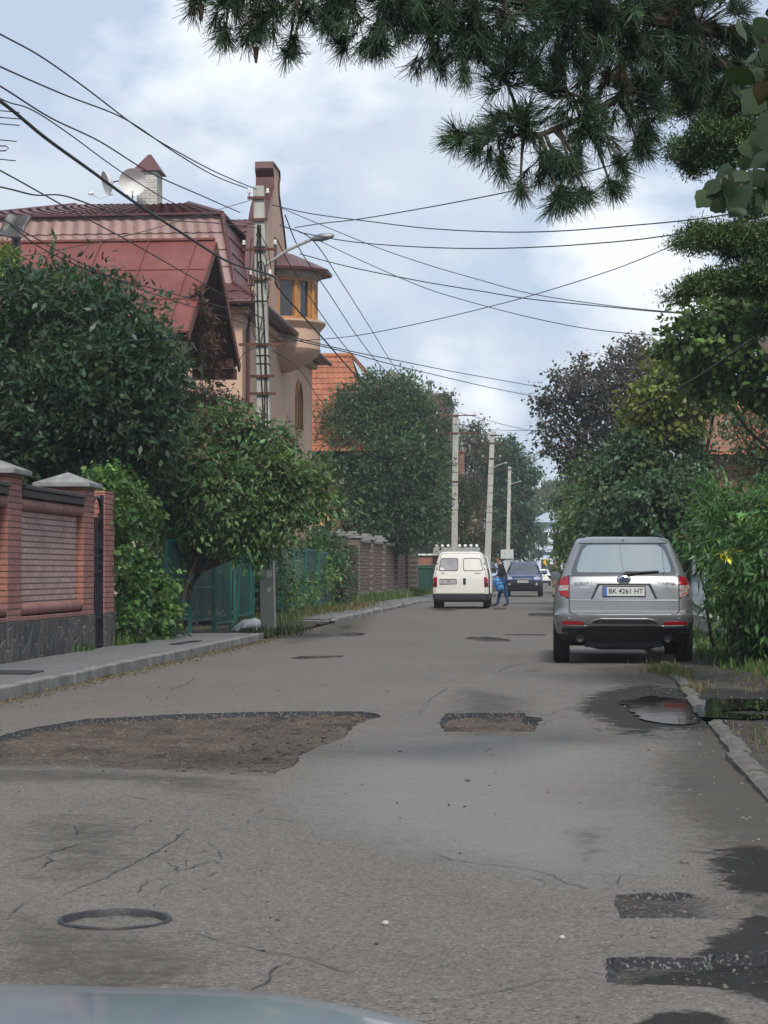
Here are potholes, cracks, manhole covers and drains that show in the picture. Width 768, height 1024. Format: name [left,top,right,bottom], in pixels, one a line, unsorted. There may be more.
pothole [0,711,381,776]
pothole [605,950,768,991]
pothole [614,892,753,919]
manhole cover [57,908,172,930]
crack [5,795,310,914]
crack [437,854,661,888]
pothole [439,713,543,732]
